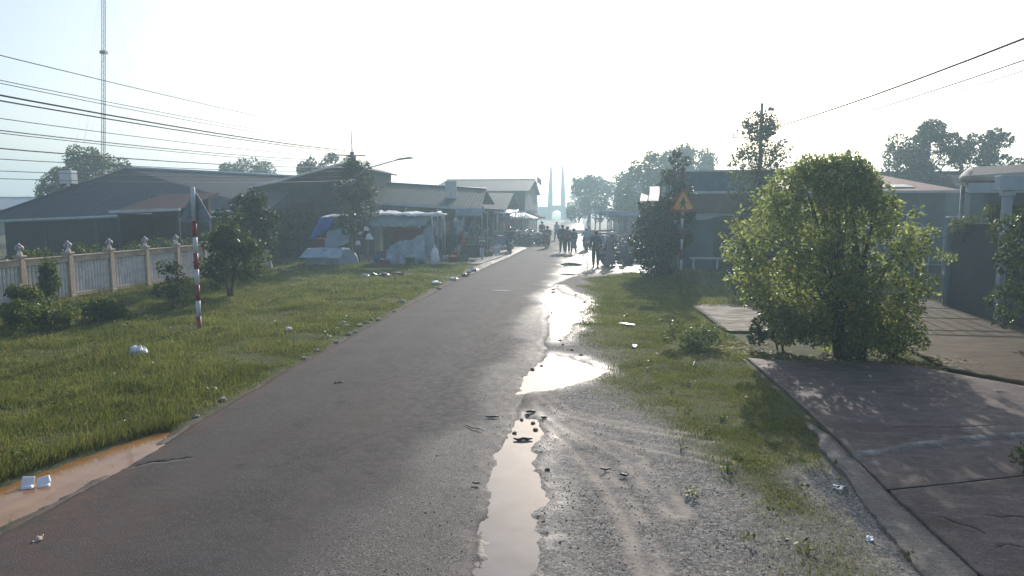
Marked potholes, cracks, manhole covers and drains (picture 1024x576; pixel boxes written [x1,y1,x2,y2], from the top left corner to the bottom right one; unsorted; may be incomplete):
crack [944,515,1024,548]
